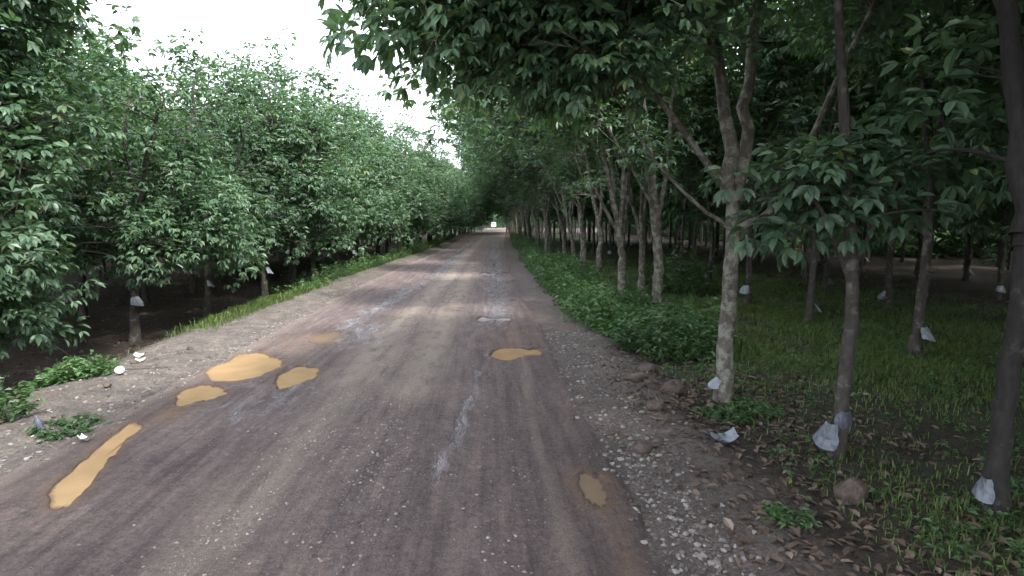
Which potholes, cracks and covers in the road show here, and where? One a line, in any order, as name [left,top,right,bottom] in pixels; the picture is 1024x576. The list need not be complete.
pothole [28,419,157,517]
pothole [482,346,550,362]
pothole [264,363,328,392]
pothole [301,331,347,346]
pothole [563,464,628,518]
pothole [196,351,293,384]
pothole [163,382,238,410]
